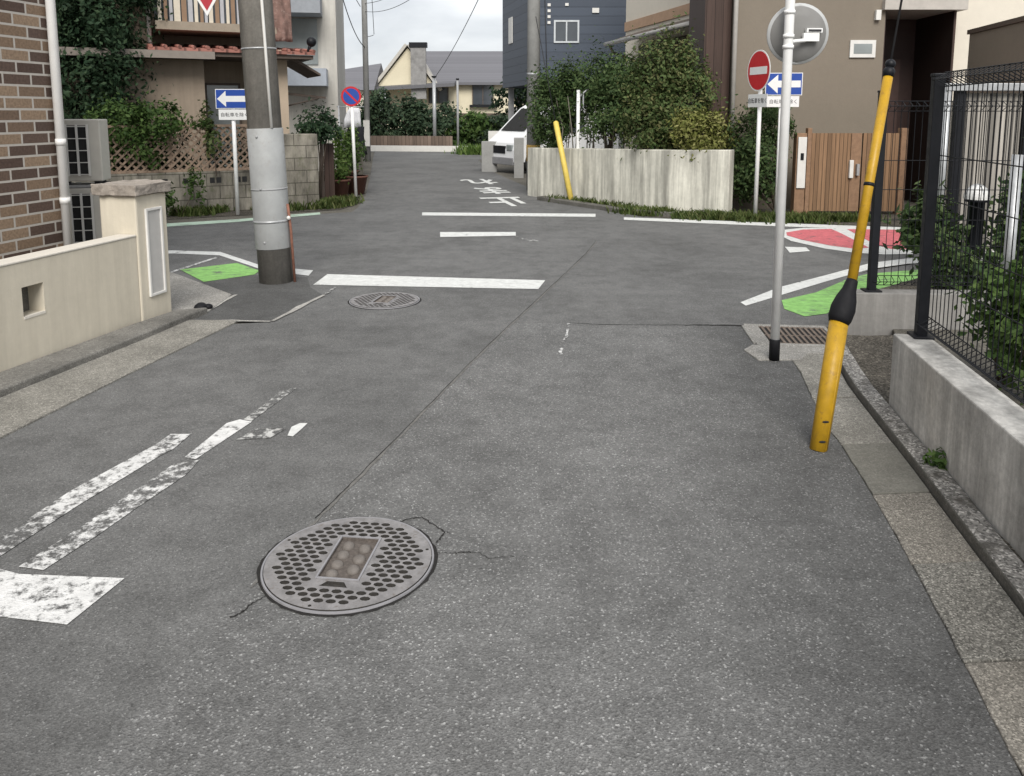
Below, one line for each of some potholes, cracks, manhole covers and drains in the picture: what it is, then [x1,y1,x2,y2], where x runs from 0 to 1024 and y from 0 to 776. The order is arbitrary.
crack [402,517,514,559]
drain grate [741,324,828,347]
manhole cover [256,516,438,617]
manhole cover [348,292,421,310]
